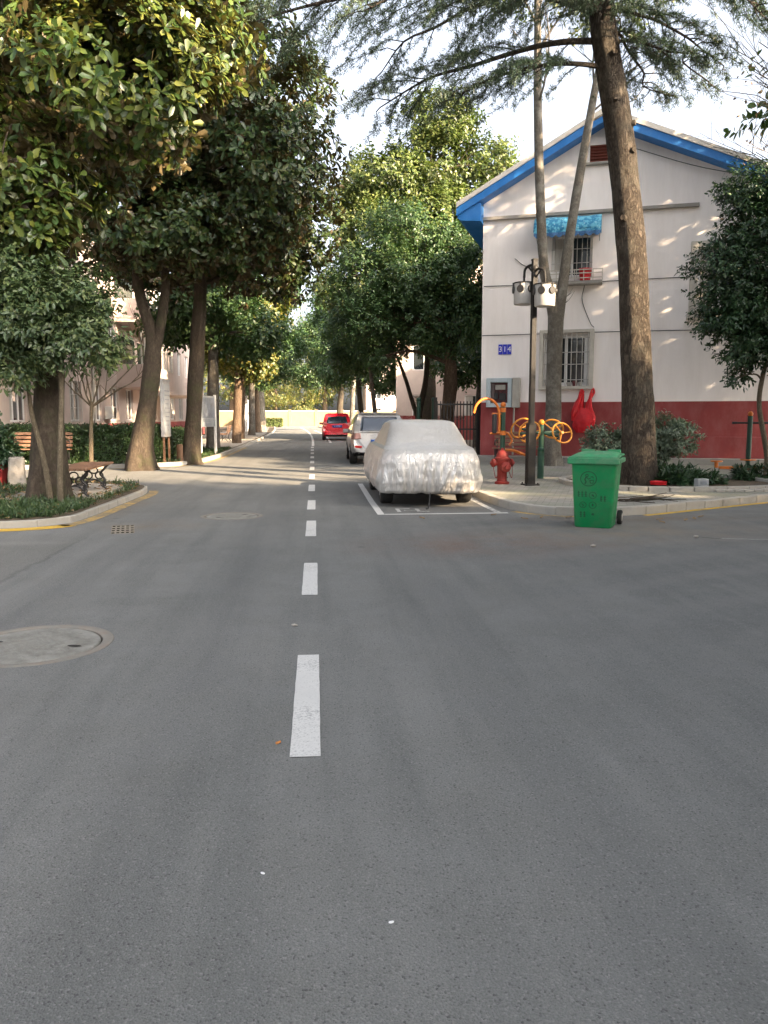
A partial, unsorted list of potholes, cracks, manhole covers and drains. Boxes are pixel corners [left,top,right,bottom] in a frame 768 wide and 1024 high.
drain grate [110,525,135,534]
manhole cover [0,625,114,668]
manhole cover [200,512,263,520]
